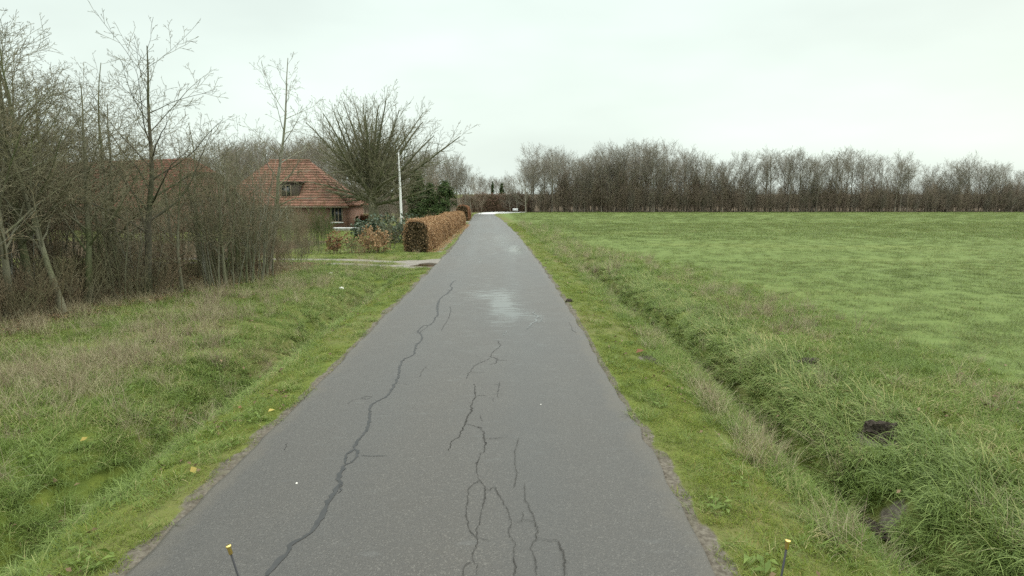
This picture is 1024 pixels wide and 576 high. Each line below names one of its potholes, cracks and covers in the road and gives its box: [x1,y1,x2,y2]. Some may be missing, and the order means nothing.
crack [448,326,566,575]
